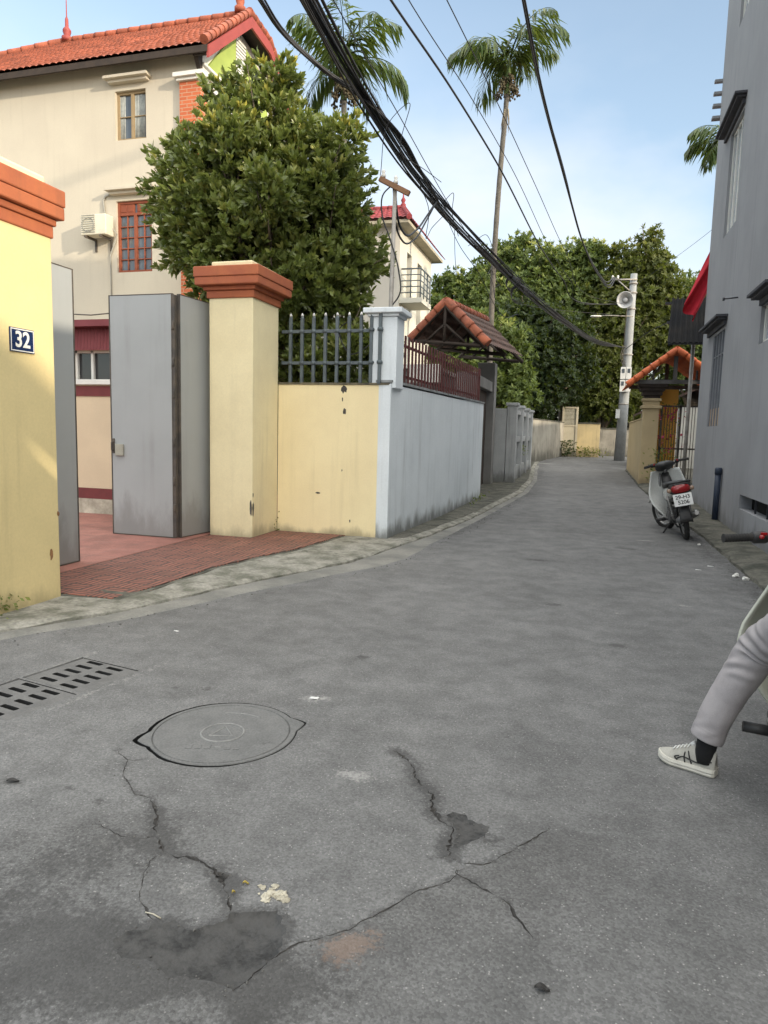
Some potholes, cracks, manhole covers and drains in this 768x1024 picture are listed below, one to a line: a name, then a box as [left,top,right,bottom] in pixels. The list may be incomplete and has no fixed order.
drain grate [0,678,76,721]
crack [227,751,550,995]
manhole cover [132,703,306,767]
drain grate [23,657,138,693]
pothole [446,812,489,849]
pothole [113,910,286,993]
crack [94,751,232,922]
